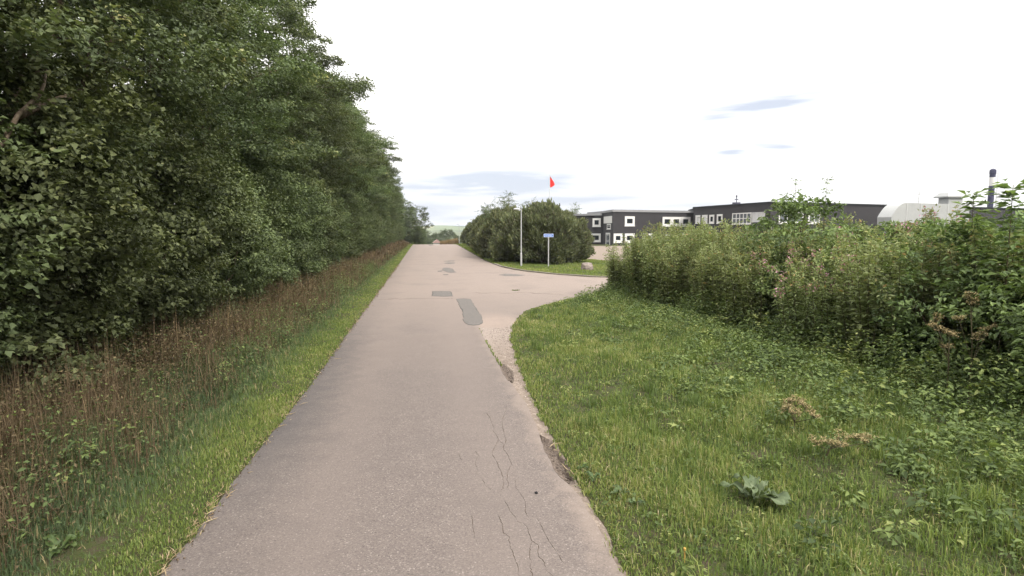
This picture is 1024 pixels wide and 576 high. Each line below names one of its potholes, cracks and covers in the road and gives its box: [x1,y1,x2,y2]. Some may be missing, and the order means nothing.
pothole [540,435,575,484]
crack [460,414,563,576]
pothole [500,364,514,382]
